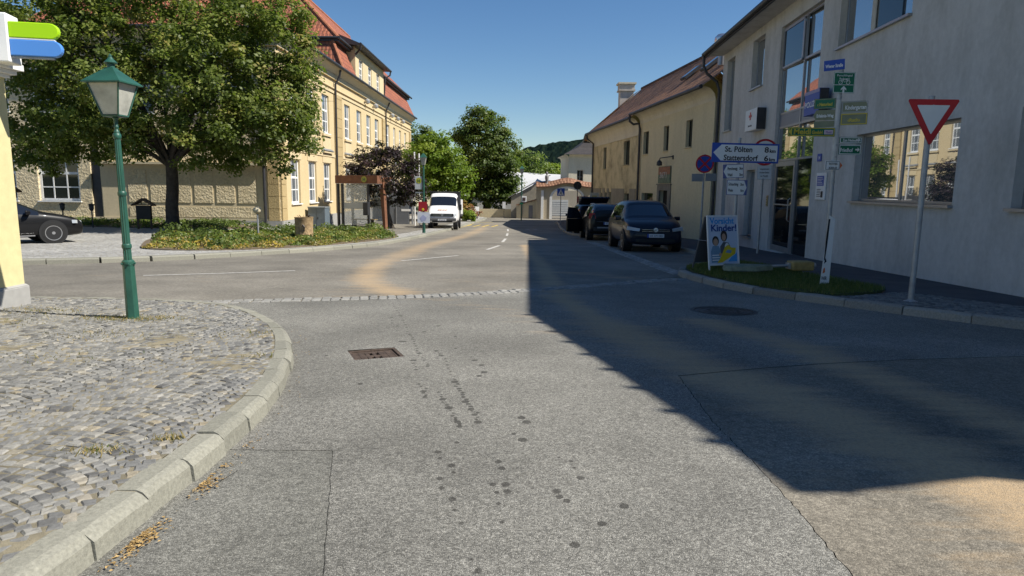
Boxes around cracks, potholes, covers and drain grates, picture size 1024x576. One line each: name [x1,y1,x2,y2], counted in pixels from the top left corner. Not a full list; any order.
manhole cover [690,306,758,316]
